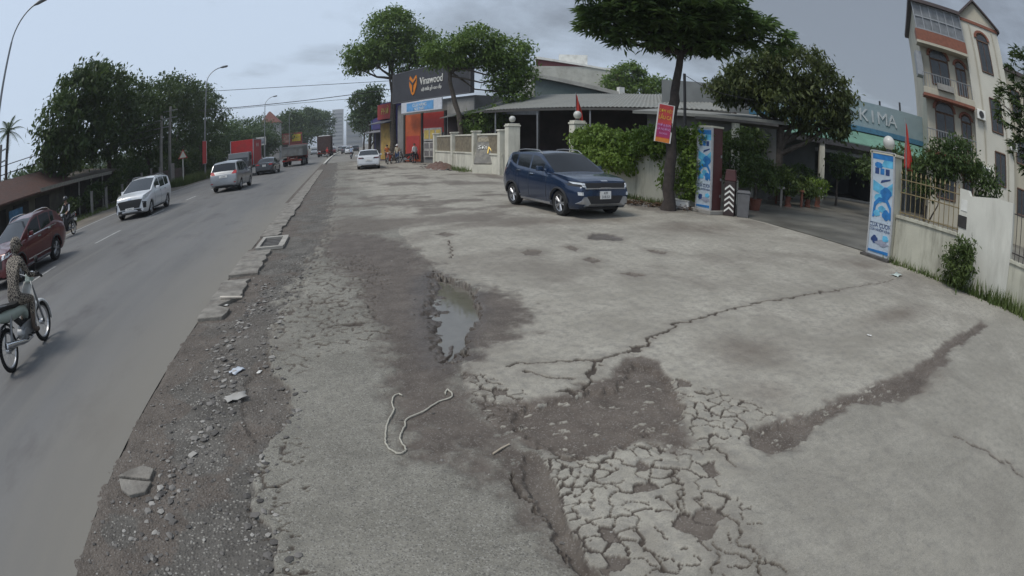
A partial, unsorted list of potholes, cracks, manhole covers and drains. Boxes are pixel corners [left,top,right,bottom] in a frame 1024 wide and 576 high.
crack [461,278,900,423]
crack [954,436,1022,476]
pothole [498,361,688,461]
crack [510,378,786,576]
pothole [748,382,903,454]
pothole [900,323,988,393]
pothole [412,271,484,371]
